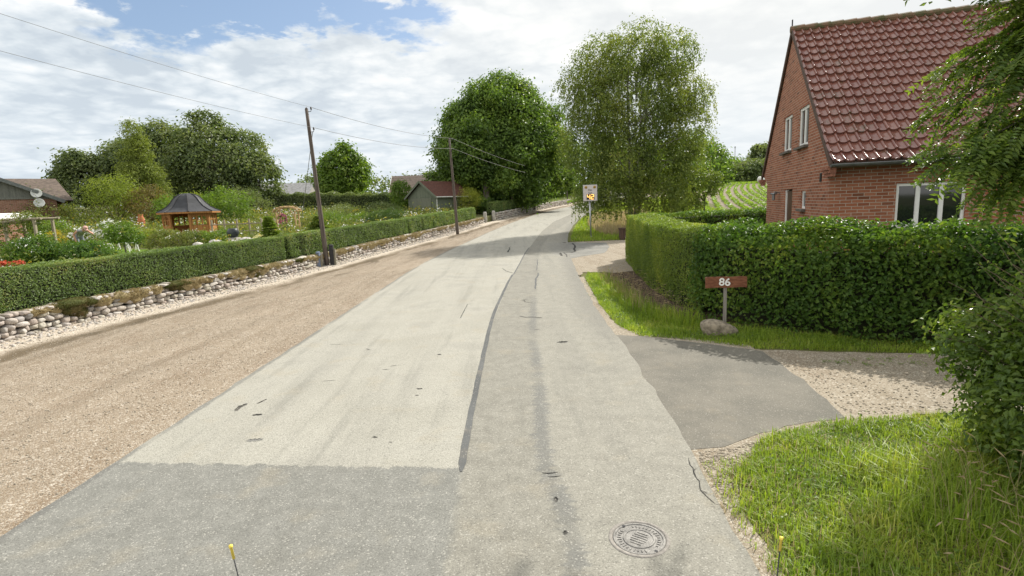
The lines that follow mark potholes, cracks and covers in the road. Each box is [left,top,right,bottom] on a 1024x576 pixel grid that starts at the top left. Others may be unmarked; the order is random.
manhole cover [608,520,671,558]
